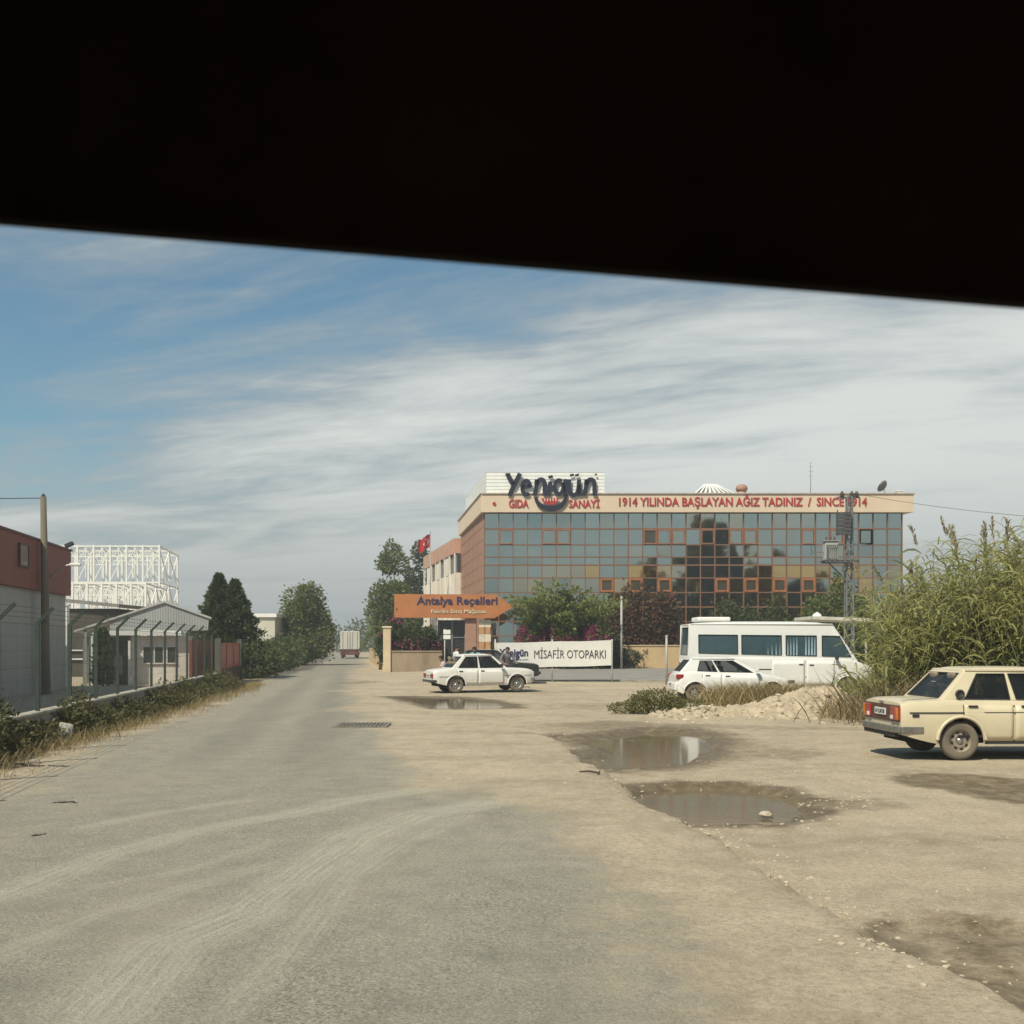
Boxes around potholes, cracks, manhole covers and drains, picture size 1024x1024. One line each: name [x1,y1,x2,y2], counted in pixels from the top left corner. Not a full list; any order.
pothole [538,727,726,768]
pothole [387,696,512,709]
pothole [615,782,827,824]
